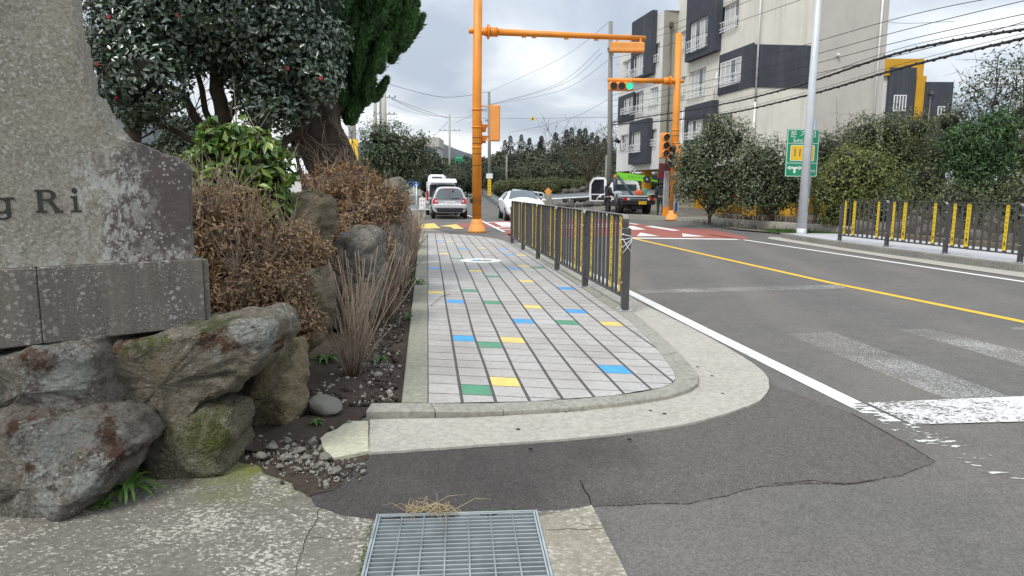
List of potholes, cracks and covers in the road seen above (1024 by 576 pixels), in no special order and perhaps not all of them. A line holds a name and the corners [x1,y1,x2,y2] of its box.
drain grate [361,509,553,576]
